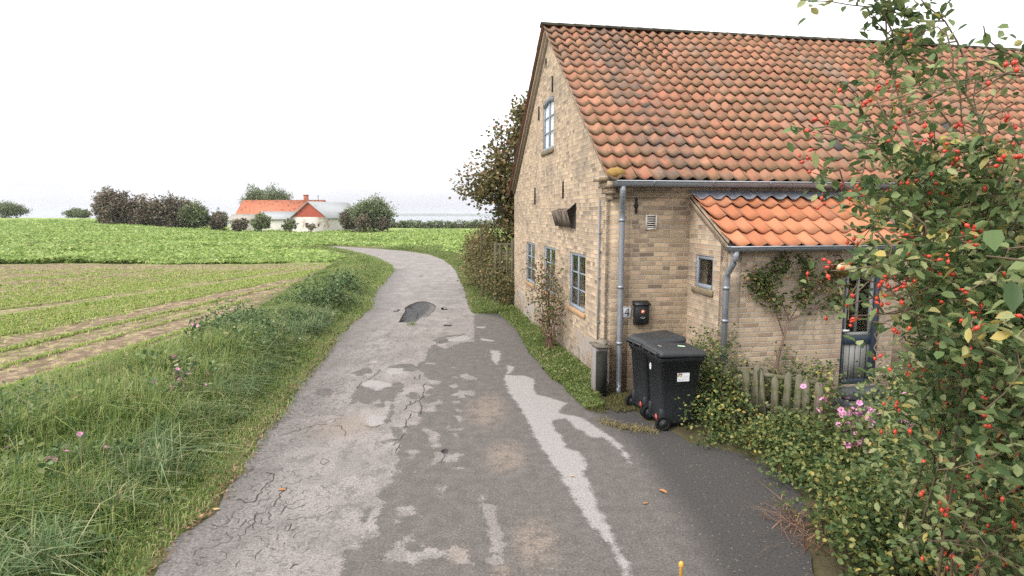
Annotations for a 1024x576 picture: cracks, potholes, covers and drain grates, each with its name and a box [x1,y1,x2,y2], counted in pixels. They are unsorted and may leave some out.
crack [193,369,380,569]
pothole [399,301,436,323]
crack [364,376,432,452]
